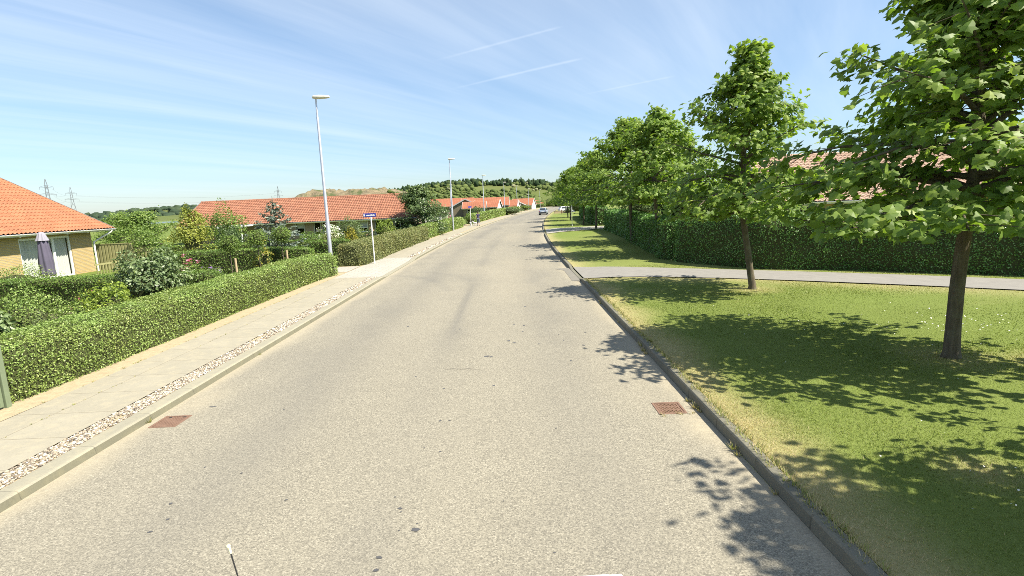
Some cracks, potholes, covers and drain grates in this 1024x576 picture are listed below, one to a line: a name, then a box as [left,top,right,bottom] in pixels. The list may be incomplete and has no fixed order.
drain grate [651,402,687,415]
manhole cover [148,415,192,428]
